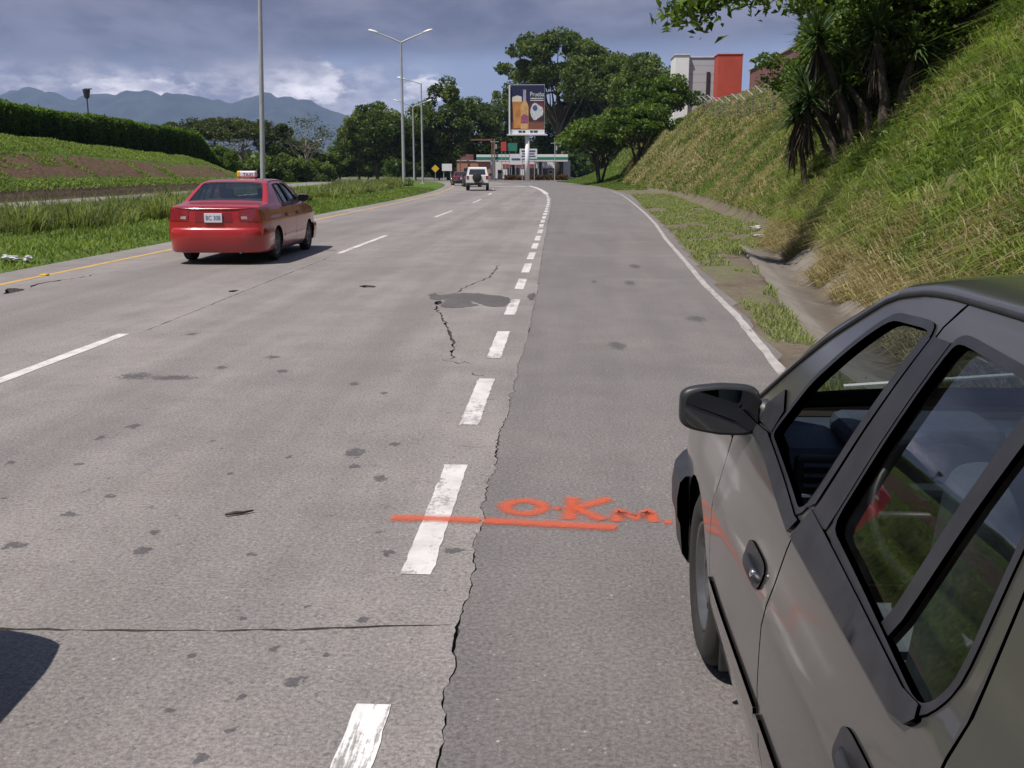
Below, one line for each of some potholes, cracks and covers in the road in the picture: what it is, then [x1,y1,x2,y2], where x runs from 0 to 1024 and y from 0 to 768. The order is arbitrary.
crack [0,225,548,768]
